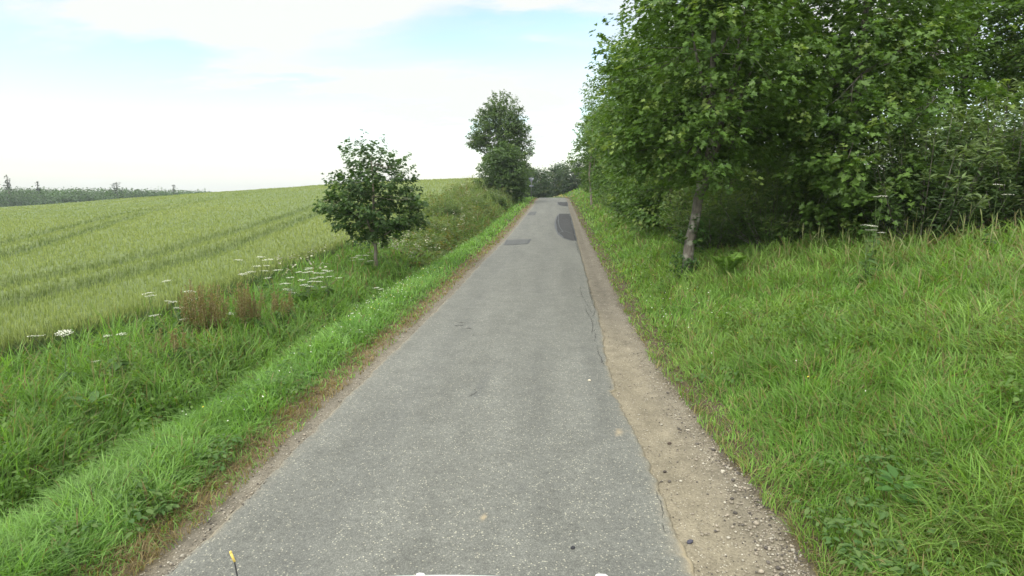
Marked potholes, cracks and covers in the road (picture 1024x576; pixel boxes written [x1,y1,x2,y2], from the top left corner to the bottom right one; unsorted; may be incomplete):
crack [580,287,604,364]
